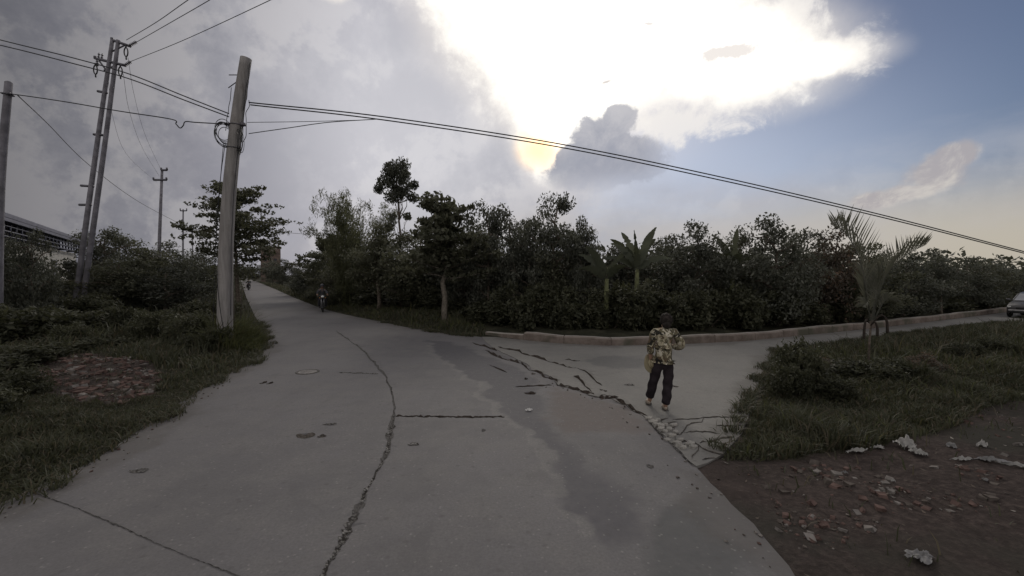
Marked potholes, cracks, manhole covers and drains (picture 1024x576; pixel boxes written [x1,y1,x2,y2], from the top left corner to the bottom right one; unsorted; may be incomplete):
crack [472,342,744,460]
